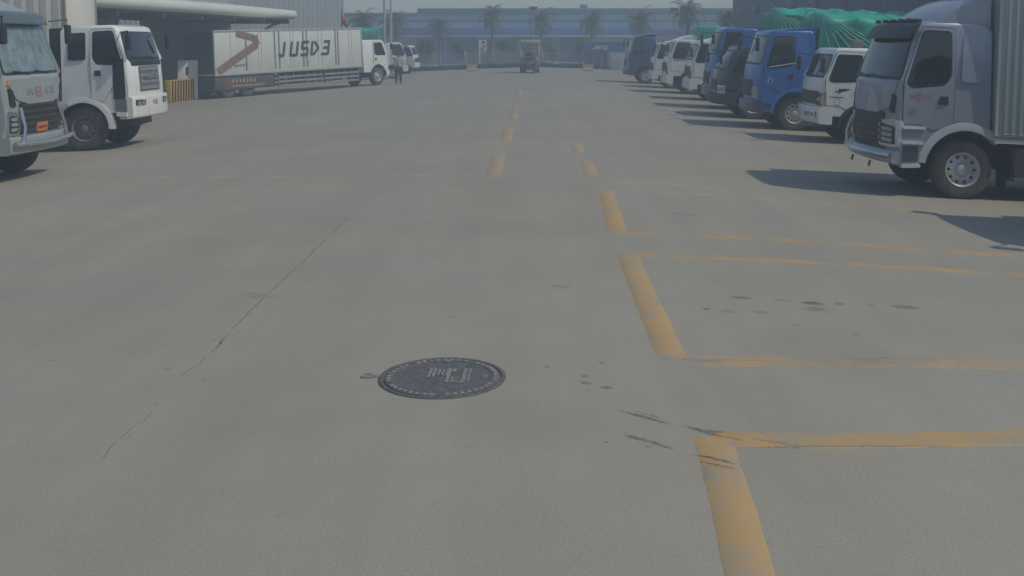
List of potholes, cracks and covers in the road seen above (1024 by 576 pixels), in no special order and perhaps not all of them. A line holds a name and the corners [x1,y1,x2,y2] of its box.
manhole cover [361,357,506,399]
crack [103,217,349,459]
